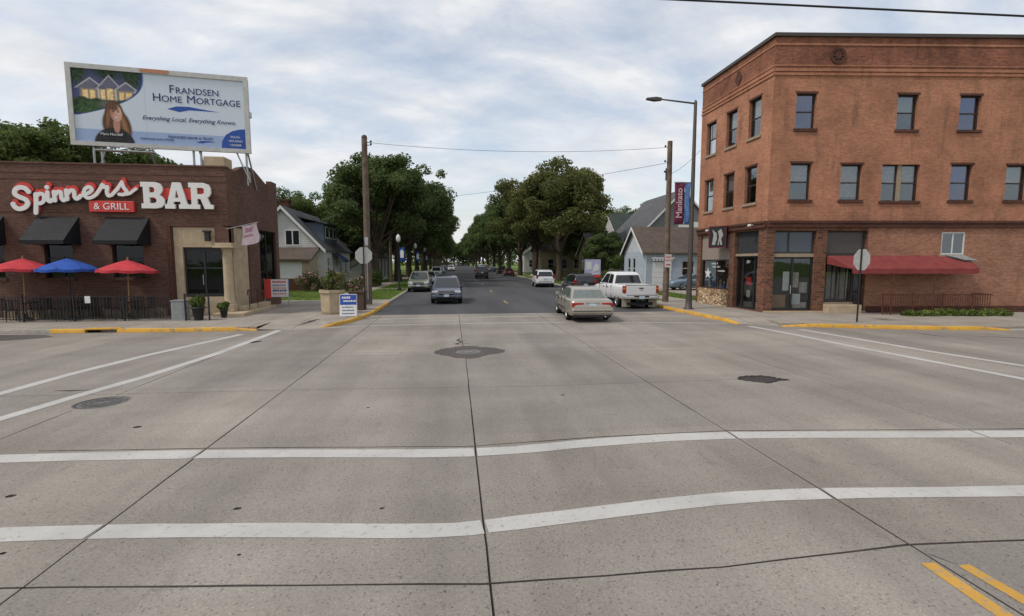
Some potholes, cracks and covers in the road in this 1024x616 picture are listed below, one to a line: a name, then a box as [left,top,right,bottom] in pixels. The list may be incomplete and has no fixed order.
manhole cover [71,396,131,409]
